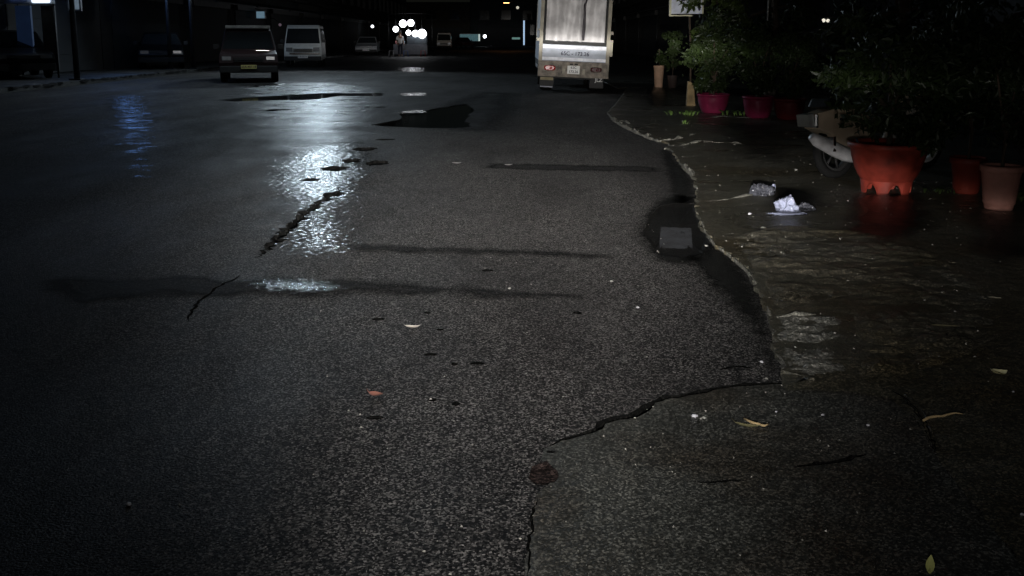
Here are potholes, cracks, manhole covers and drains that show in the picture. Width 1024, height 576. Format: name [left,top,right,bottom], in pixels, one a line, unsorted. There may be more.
crack [254,189,343,258]
pothole [373,104,475,128]
crack [542,365,866,467]
crack [187,276,239,322]
crack [891,390,936,450]
